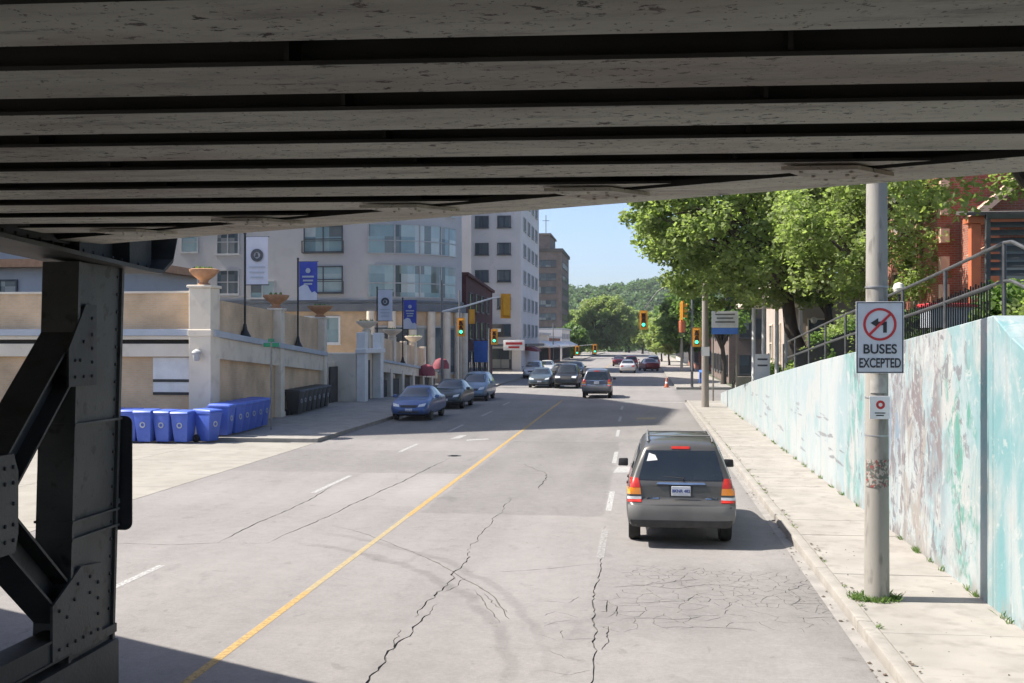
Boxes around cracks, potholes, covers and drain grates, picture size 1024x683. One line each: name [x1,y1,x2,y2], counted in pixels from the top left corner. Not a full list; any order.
crack [604,565,830,632]
crack [268,460,446,543]
crack [336,500,511,683]
